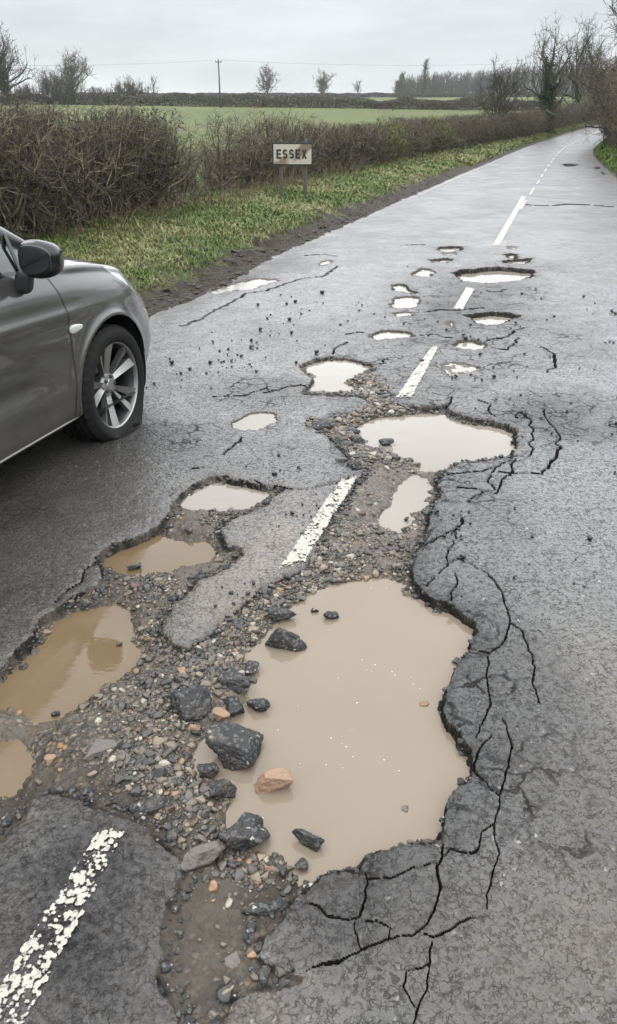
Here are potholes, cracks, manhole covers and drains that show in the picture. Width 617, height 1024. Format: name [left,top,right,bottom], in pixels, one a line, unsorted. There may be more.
pothole [0,581,182,735]
pothole [410,267,437,277]
crack [309,516,540,1024]
pothole [439,361,482,377]
pothole [94,516,243,585]
pothole [368,329,416,340]
pothole [463,311,521,326]
pothole [450,339,488,350]
pothole [388,295,422,309]
pothole [230,411,280,431]
pothole [145,552,479,926]
pothole [326,403,519,543]
